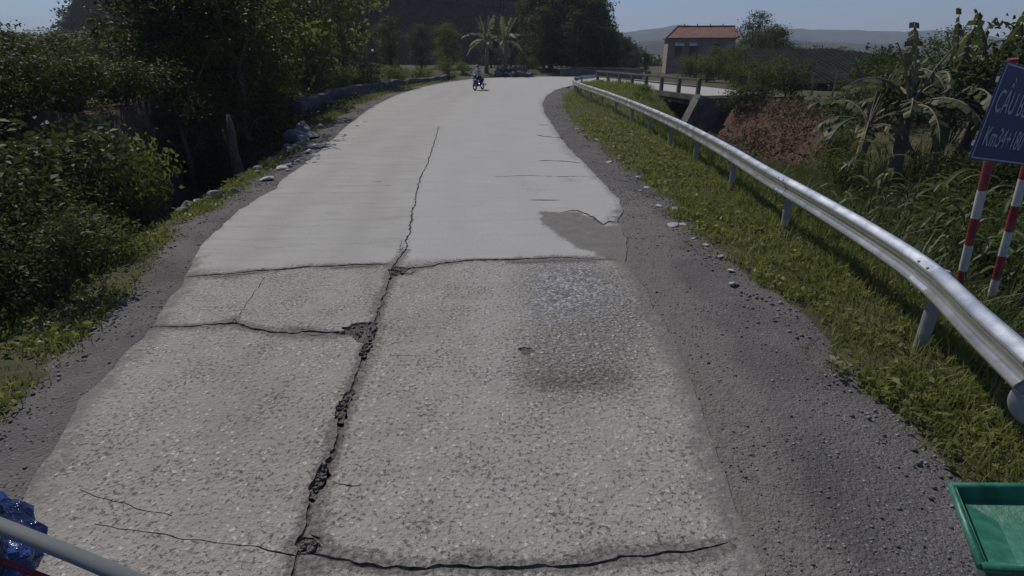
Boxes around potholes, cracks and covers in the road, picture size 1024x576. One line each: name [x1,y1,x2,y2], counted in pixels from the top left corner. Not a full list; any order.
crack [80,127,439,576]
crack [496,160,578,177]
